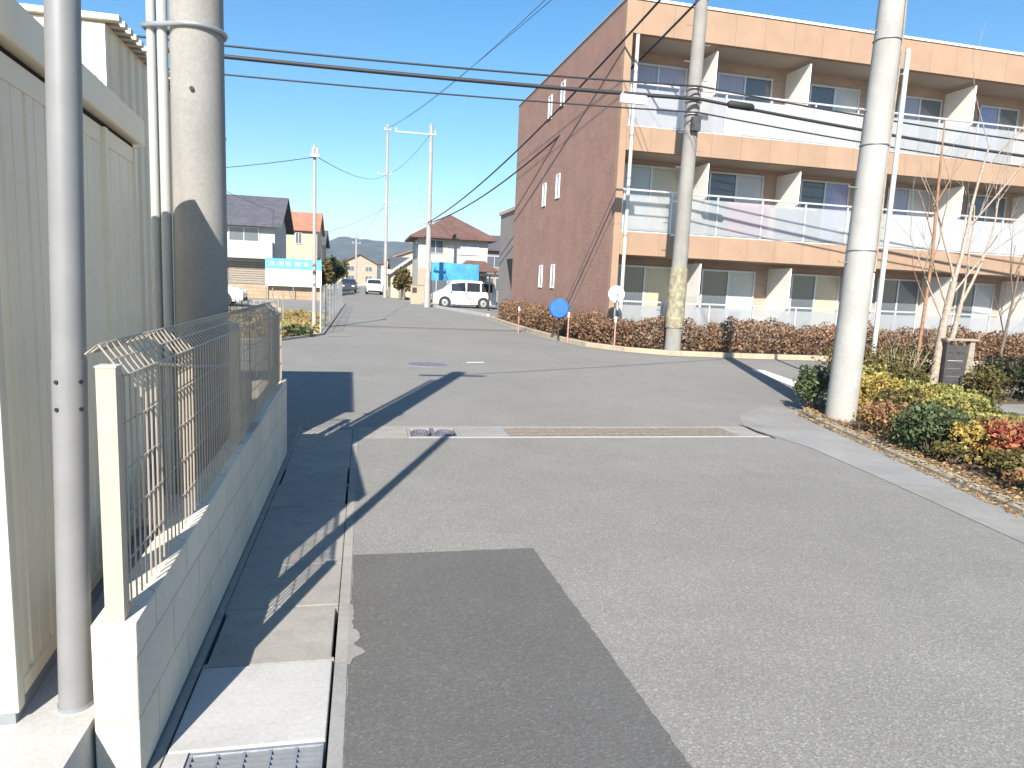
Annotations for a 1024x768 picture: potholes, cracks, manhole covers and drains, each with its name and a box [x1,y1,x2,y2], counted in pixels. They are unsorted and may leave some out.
drain grate [677,427,736,436]
drain grate [593,428,649,436]
drain grate [635,427,693,436]
drain grate [185,742,324,768]
drain grate [548,427,604,436]
drain grate [503,427,558,437]
